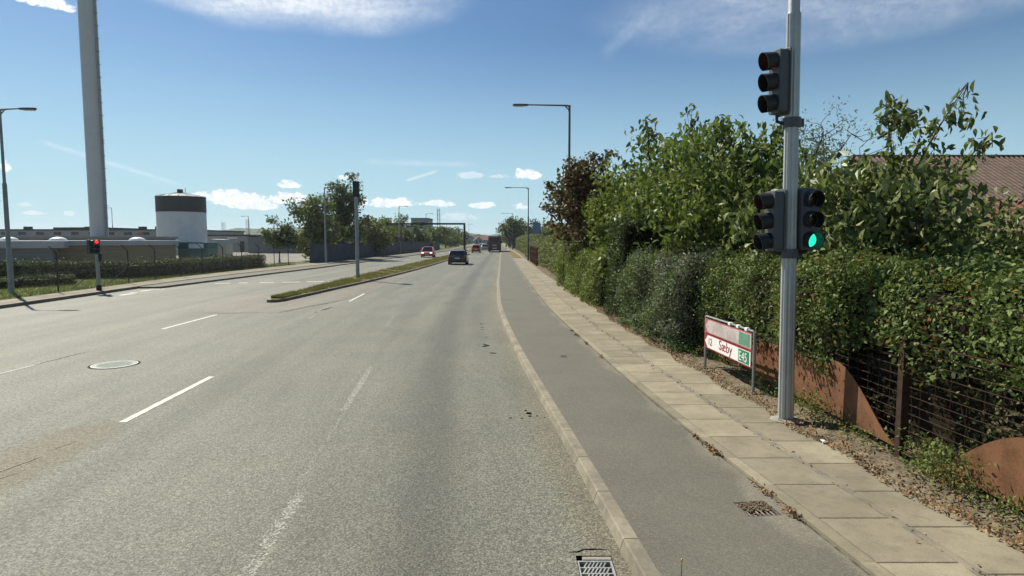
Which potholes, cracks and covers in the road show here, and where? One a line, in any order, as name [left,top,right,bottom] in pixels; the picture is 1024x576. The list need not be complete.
drain grate [576,556,617,576]
manhole cover [87,360,141,369]
drain grate [734,501,781,517]
